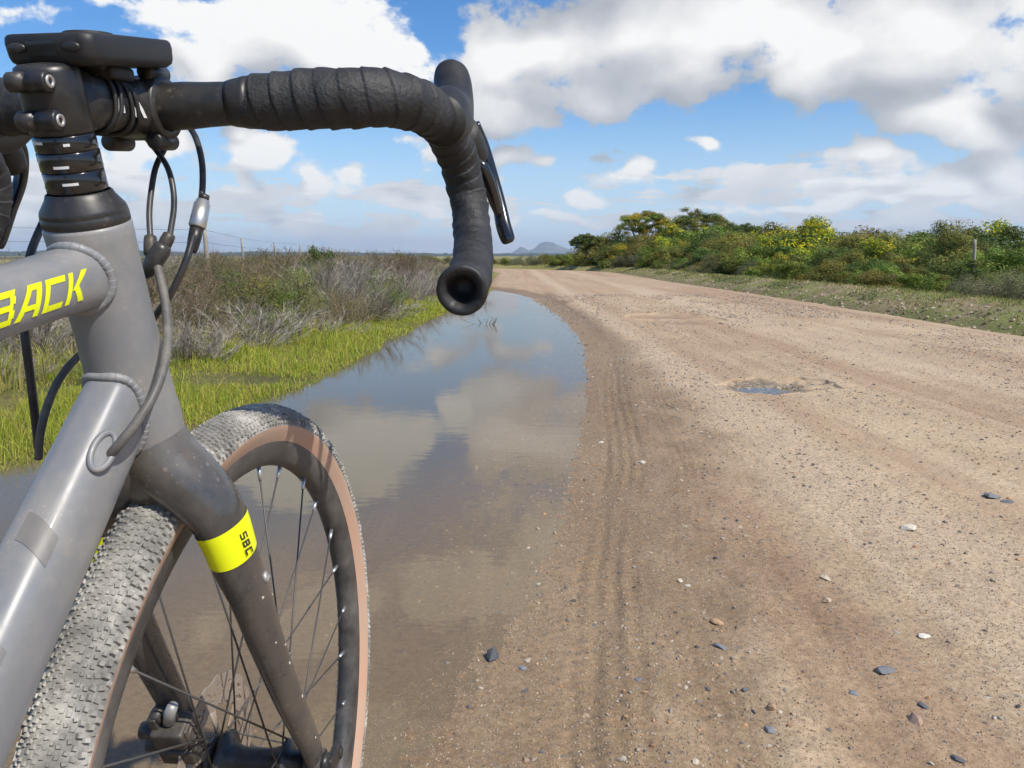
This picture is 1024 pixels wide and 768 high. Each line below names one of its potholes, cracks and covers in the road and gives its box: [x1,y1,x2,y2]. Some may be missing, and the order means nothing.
pothole [711,376,849,397]
